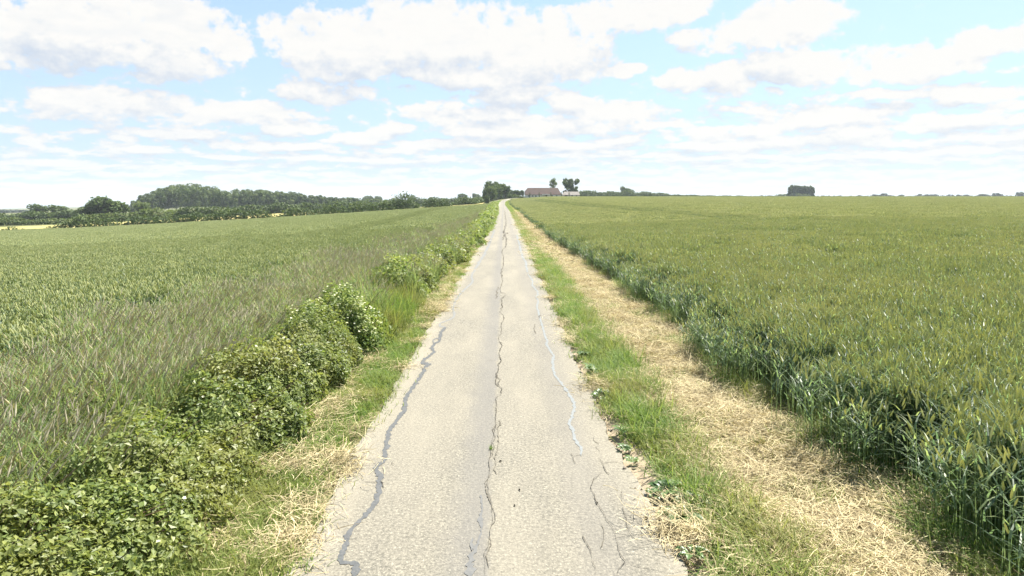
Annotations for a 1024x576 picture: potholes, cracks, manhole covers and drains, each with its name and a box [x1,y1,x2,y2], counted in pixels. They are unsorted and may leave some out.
crack [485,421,501,566]
crack [495,216,507,336]
crack [572,437,650,572]
